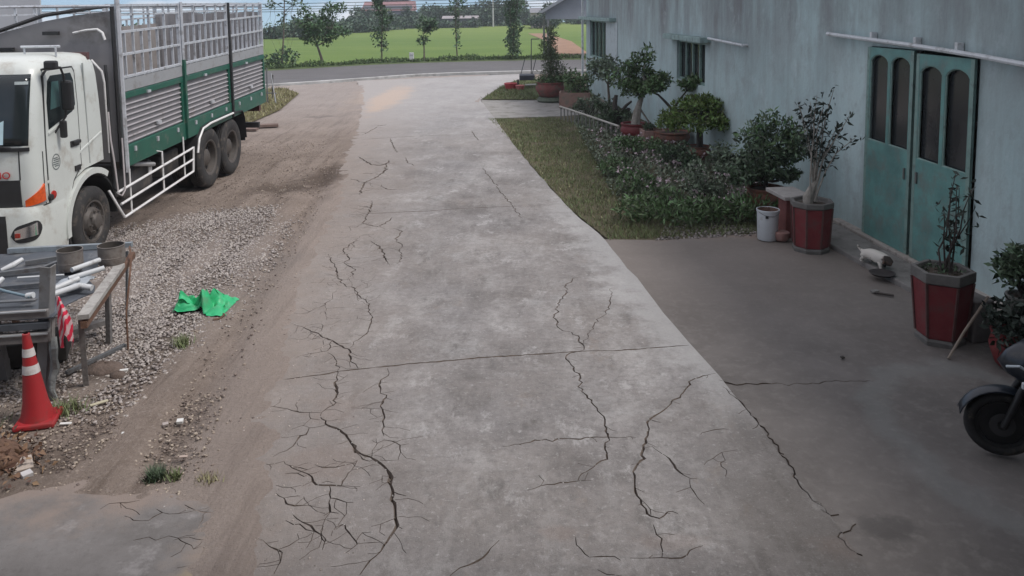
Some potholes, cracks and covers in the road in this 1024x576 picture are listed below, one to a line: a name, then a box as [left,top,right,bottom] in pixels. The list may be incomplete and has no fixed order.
crack [104,500,206,568]
crack [510,277,873,559]
crack [450,545,494,576]
crack [575,540,620,576]
crack [261,125,425,574]
